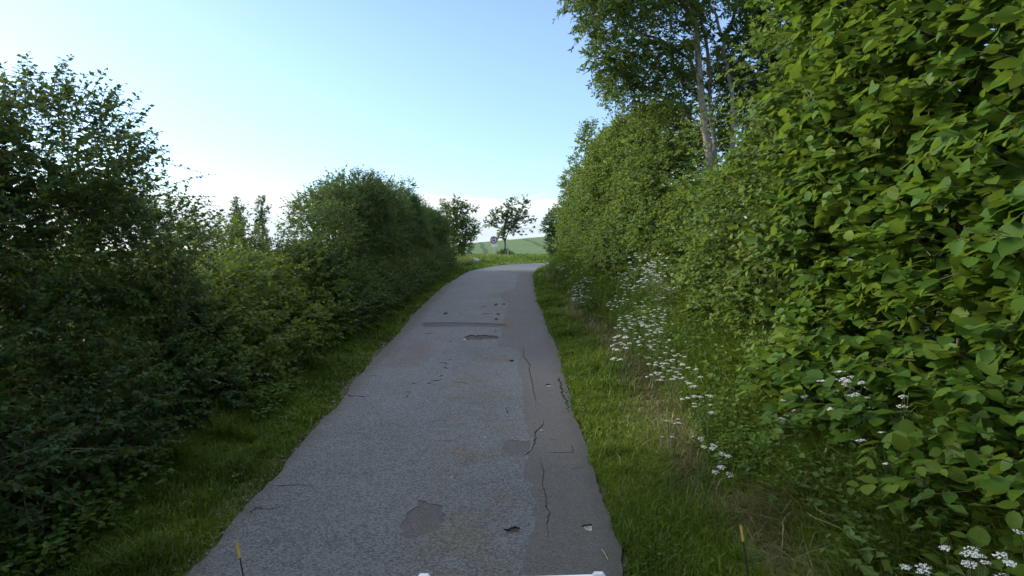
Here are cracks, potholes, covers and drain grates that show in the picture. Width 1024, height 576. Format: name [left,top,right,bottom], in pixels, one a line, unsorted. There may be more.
crack [558,380,572,410]
crack [518,422,582,534]
